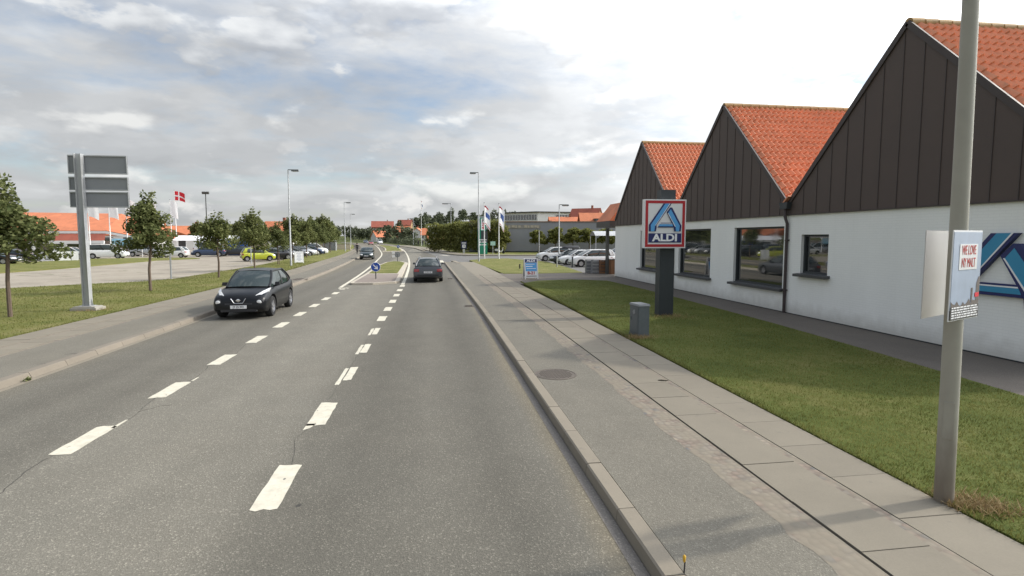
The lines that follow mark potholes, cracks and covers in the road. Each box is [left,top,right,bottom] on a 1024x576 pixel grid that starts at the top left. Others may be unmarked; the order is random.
manhole cover [534,369,577,380]
